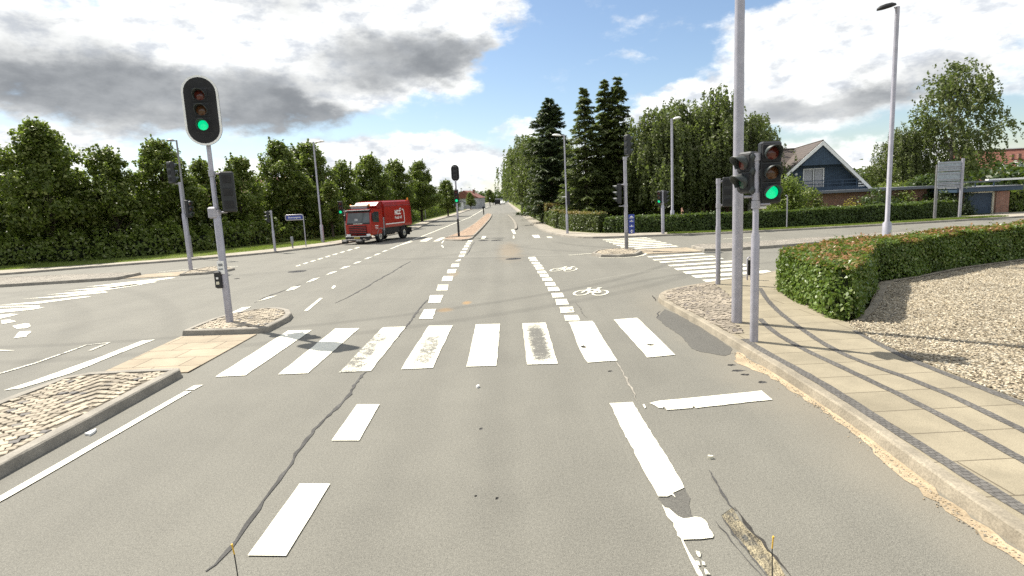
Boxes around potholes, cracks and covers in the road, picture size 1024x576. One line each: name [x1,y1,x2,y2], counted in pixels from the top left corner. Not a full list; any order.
crack [338,262,409,302]
crack [709,470,791,576]
